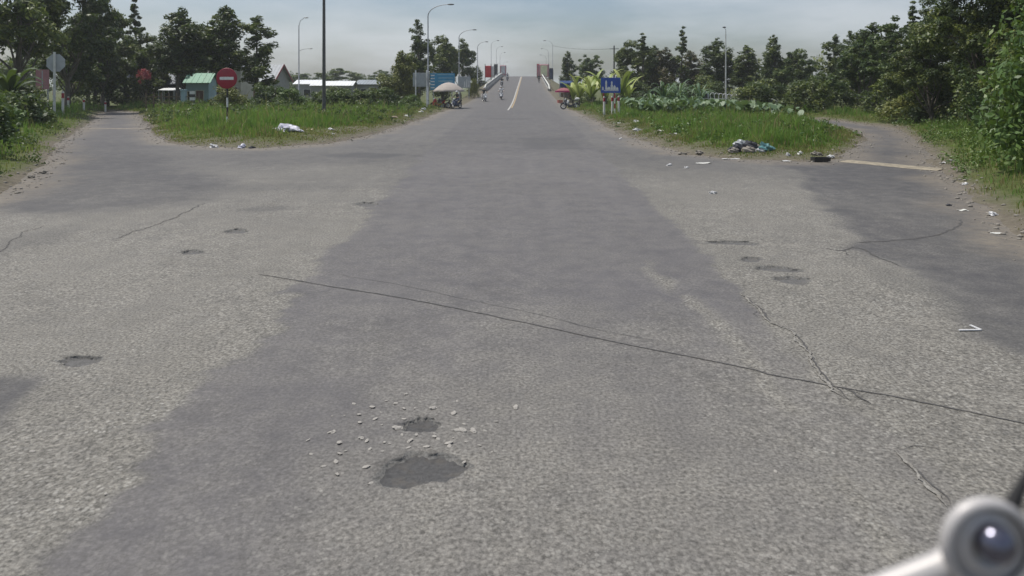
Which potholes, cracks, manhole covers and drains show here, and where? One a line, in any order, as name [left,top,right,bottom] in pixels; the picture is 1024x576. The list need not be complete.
pothole [731,255,776,265]
pothole [348,201,385,209]
crack [827,219,963,266]
pothole [761,274,823,288]
pothole [215,227,257,235]
pothole [41,351,125,373]
pothole [383,410,460,441]
crack [896,445,951,506]
pothole [684,239,784,248]
pothole [734,263,829,275]
pothole [343,443,502,502]
pothole [172,248,215,257]
